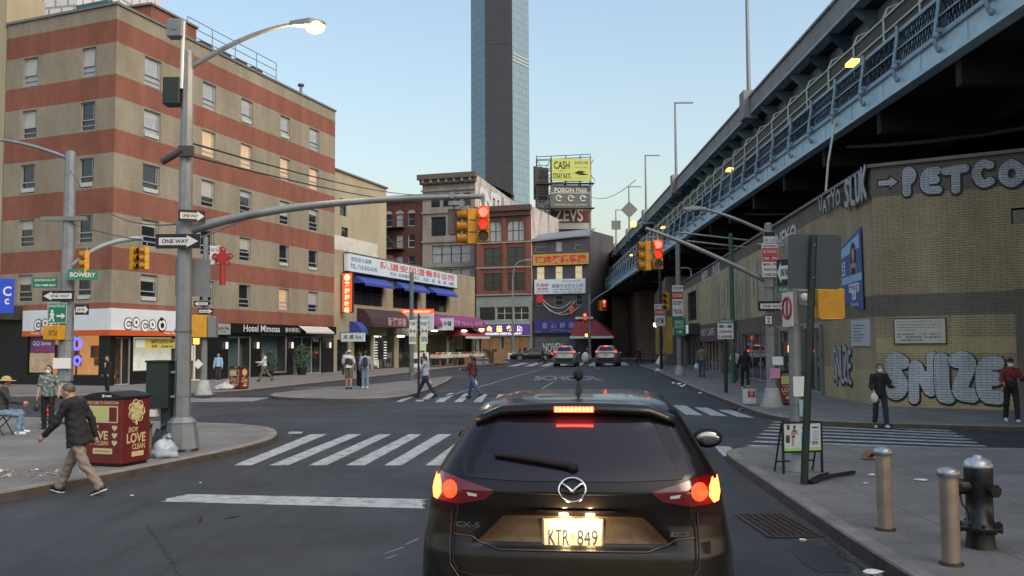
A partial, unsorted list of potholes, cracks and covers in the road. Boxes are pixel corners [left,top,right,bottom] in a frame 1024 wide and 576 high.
drain grate [734,513,825,538]
